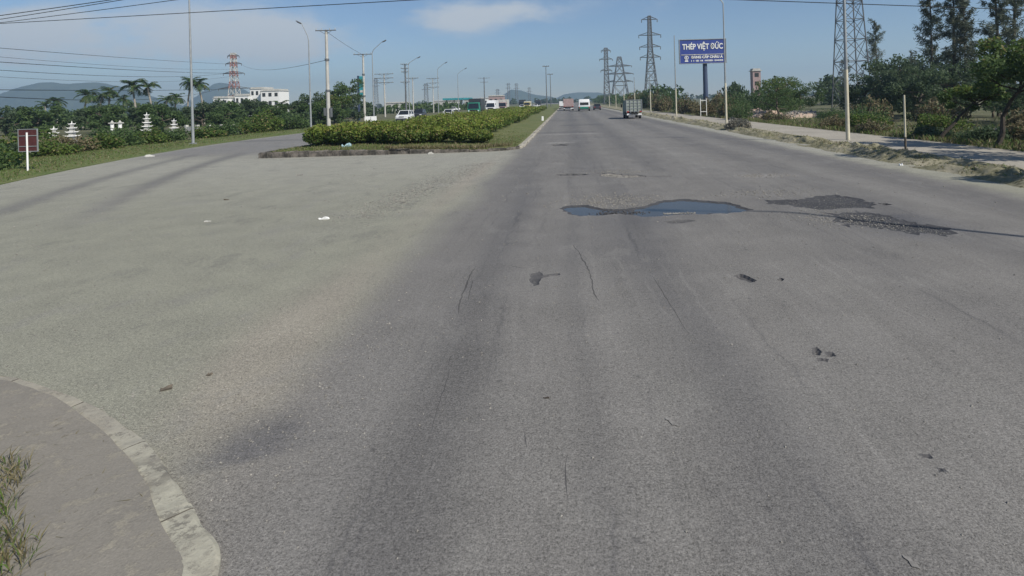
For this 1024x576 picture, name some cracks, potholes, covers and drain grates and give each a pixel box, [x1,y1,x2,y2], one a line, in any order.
pothole [529,271,560,286]
crack [573,245,597,298]
pothole [559,199,753,217]
crack [458,268,475,314]
pothole [812,347,836,362]
pothole [734,274,757,283]
